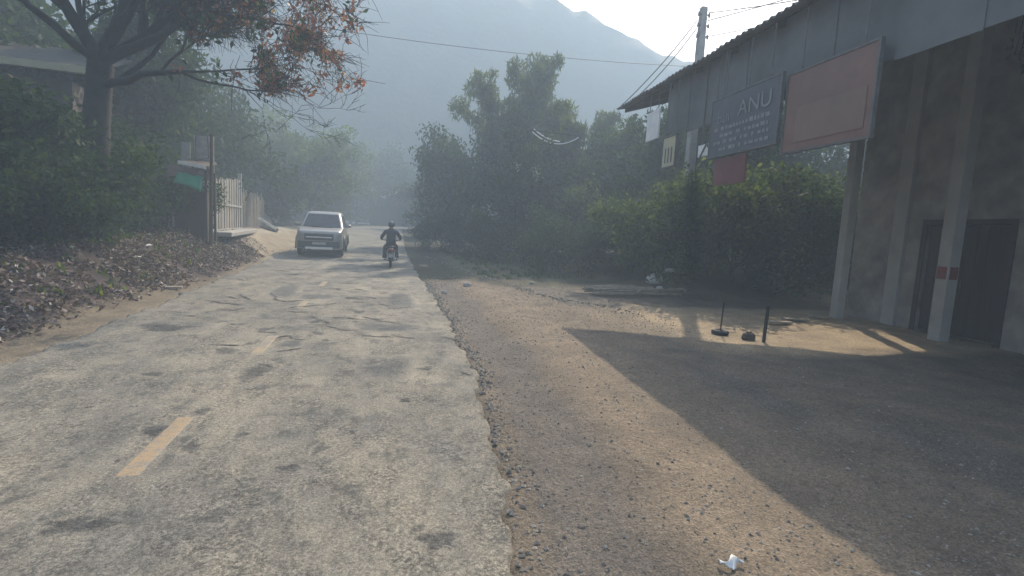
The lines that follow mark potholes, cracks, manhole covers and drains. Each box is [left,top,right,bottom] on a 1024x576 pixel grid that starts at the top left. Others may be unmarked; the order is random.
crack [270,269,413,338]
crack [184,278,249,325]
